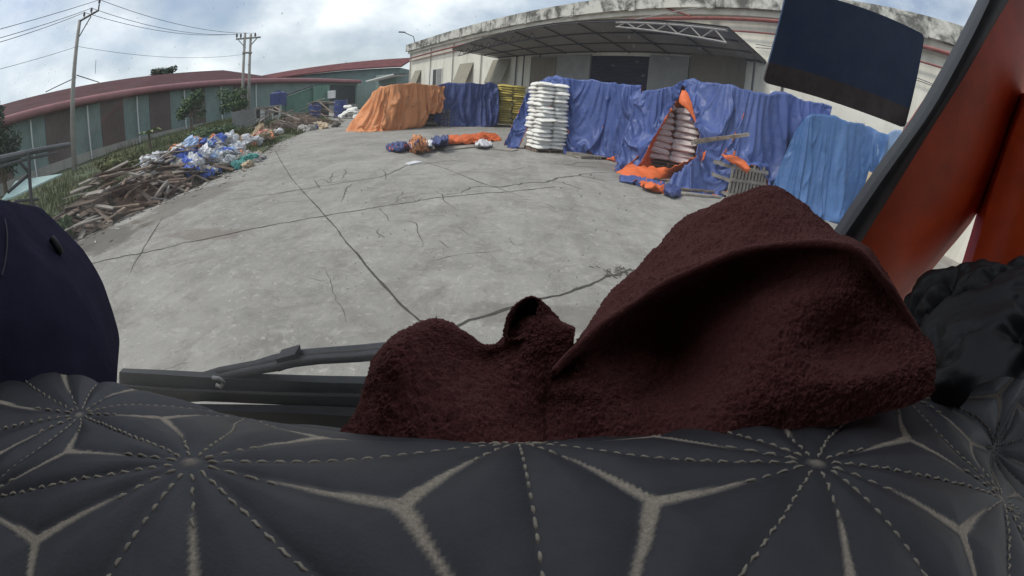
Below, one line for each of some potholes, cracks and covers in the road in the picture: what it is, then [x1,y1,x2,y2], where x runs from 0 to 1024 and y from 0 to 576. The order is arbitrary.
crack [376,162,613,262]
